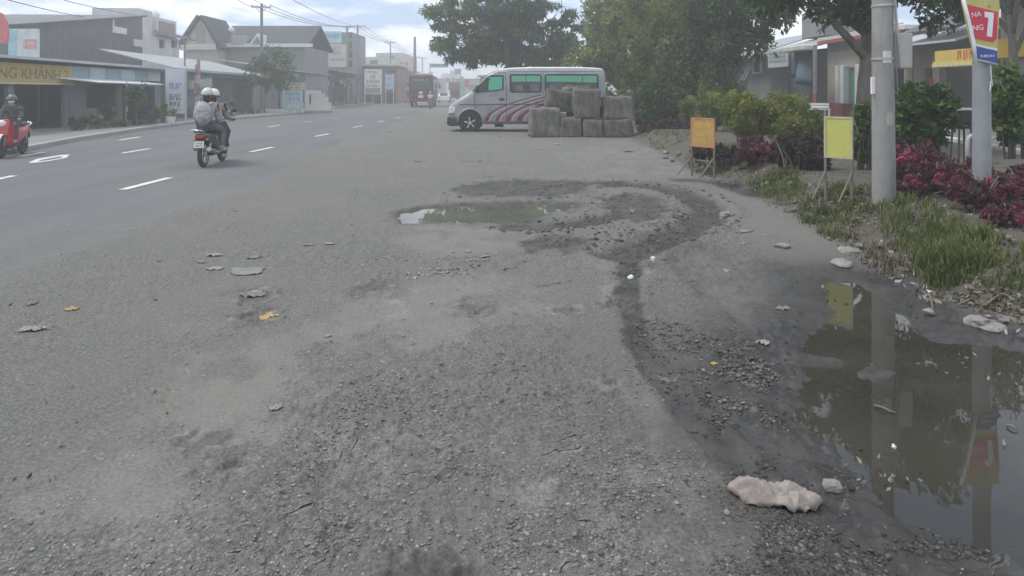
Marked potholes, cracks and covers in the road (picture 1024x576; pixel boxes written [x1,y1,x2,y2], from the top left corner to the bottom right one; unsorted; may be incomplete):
pothole [591,191,683,228]
pothole [516,235,590,253]
pothole [346,277,400,296]
pothole [156,425,251,460]
pothole [381,198,592,229]
crack [542,434,591,456]
pothole [440,297,497,323]
